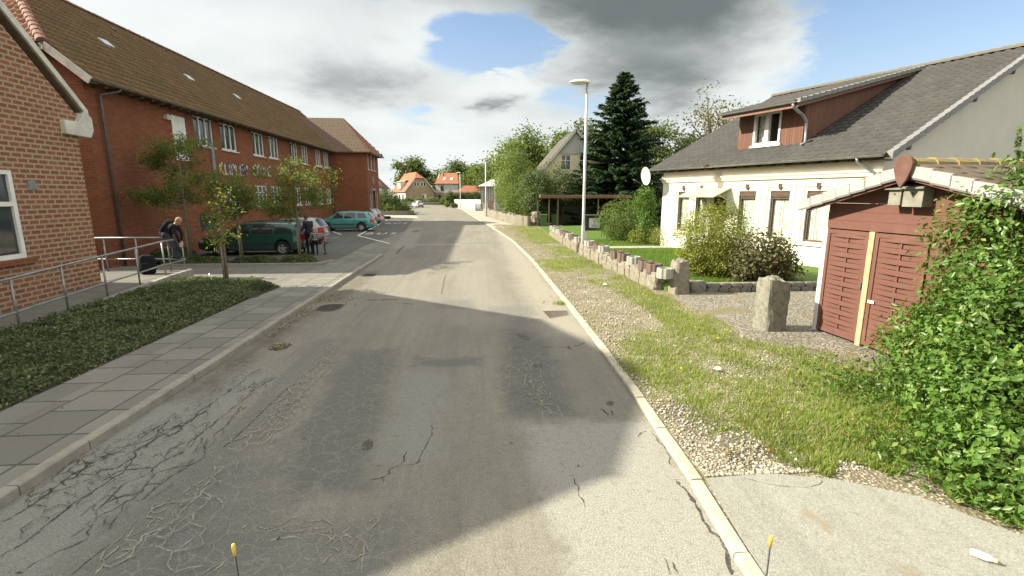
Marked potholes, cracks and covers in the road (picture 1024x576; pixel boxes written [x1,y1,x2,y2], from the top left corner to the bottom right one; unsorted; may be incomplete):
crack [375,423,437,481]
pothole [266,342,293,351]
pothole [361,438,374,451]
crack [505,343,583,420]
crack [638,431,734,575]
crack [1,343,396,575]
